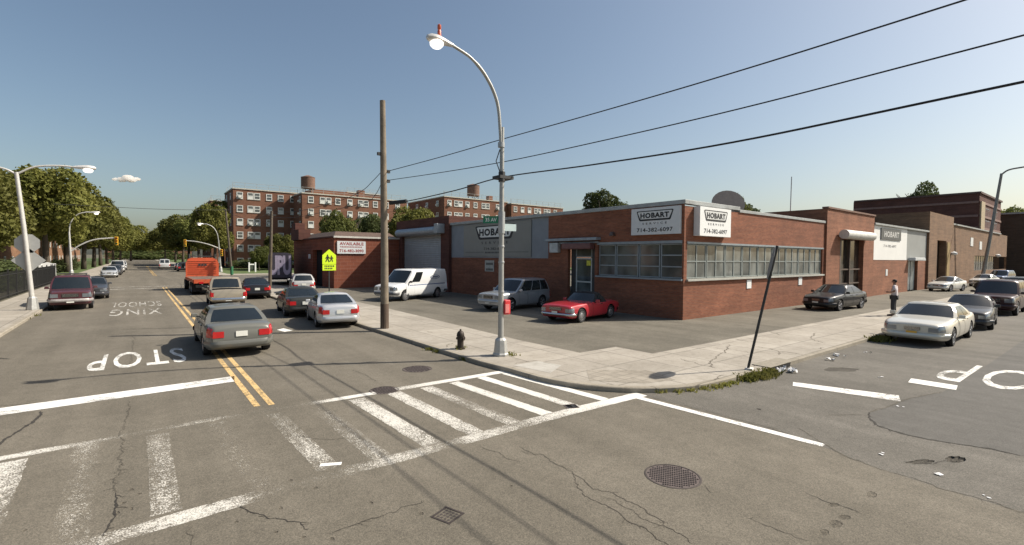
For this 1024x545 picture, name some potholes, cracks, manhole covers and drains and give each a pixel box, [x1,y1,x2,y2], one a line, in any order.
crack [483,447,691,545]
manhole cover [369,386,399,394]
crack [0,403,43,445]
manhole cover [644,464,702,489]
crack [234,503,309,530]
crack [96,401,132,545]
